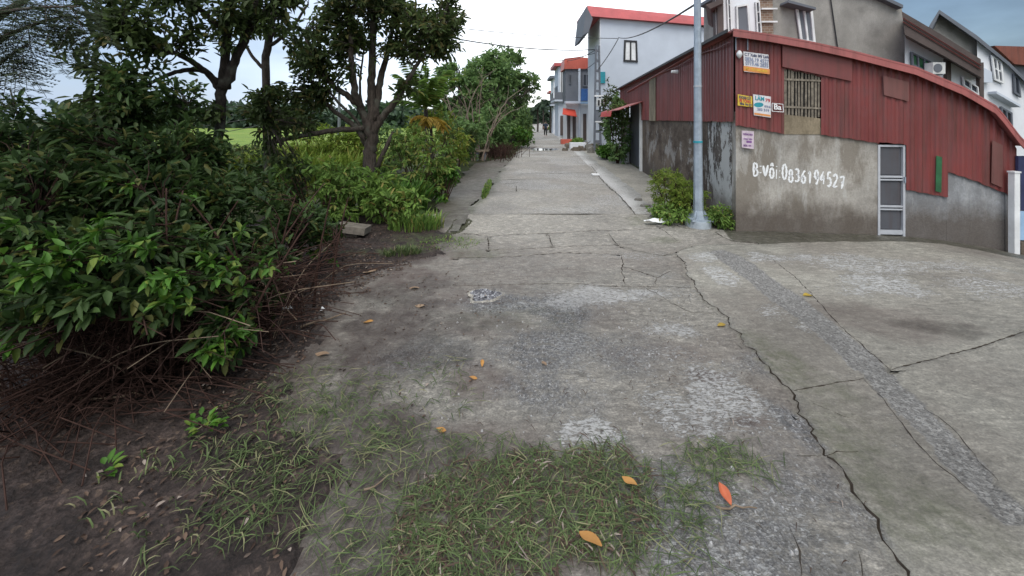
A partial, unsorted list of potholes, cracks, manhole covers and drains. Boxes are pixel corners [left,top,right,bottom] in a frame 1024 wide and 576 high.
crack [620,229,998,576]
pothole [467,288,505,303]
